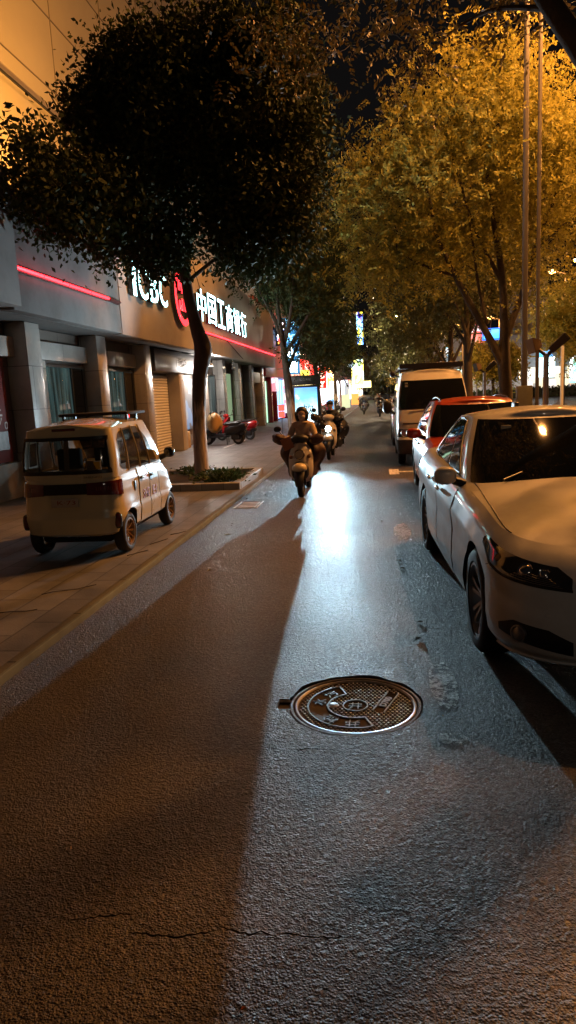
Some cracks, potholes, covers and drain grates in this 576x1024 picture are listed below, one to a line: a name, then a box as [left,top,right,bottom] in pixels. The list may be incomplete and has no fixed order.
crack [74,913,345,939]
manhole cover [277,678,423,737]
manhole cover [233,501,264,509]
